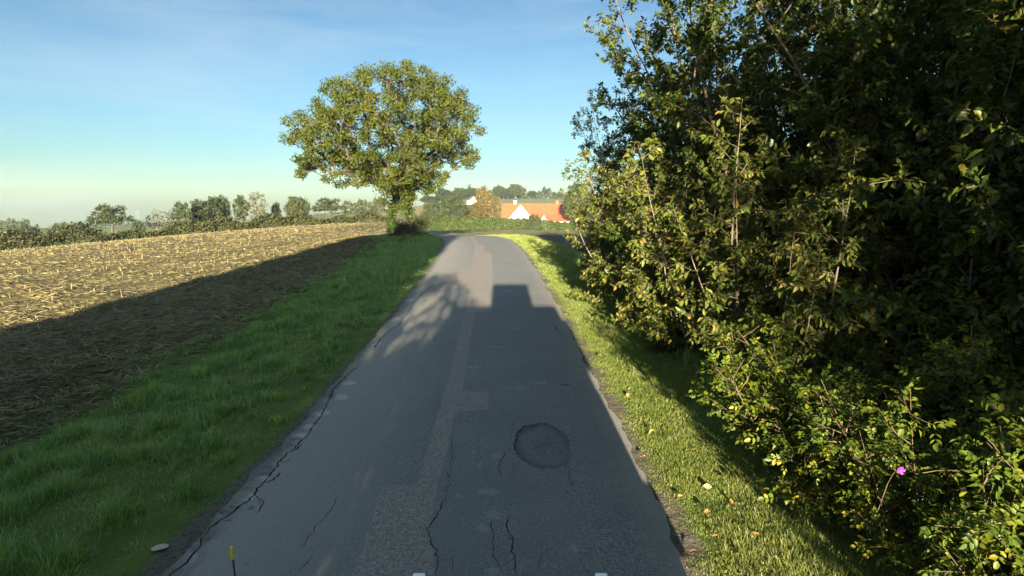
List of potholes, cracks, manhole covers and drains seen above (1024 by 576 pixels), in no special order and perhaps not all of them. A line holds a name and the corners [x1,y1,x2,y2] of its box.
crack [169,285,433,576]
crack [426,439,453,576]
crack [490,518,518,576]
pothole [513,422,572,469]
